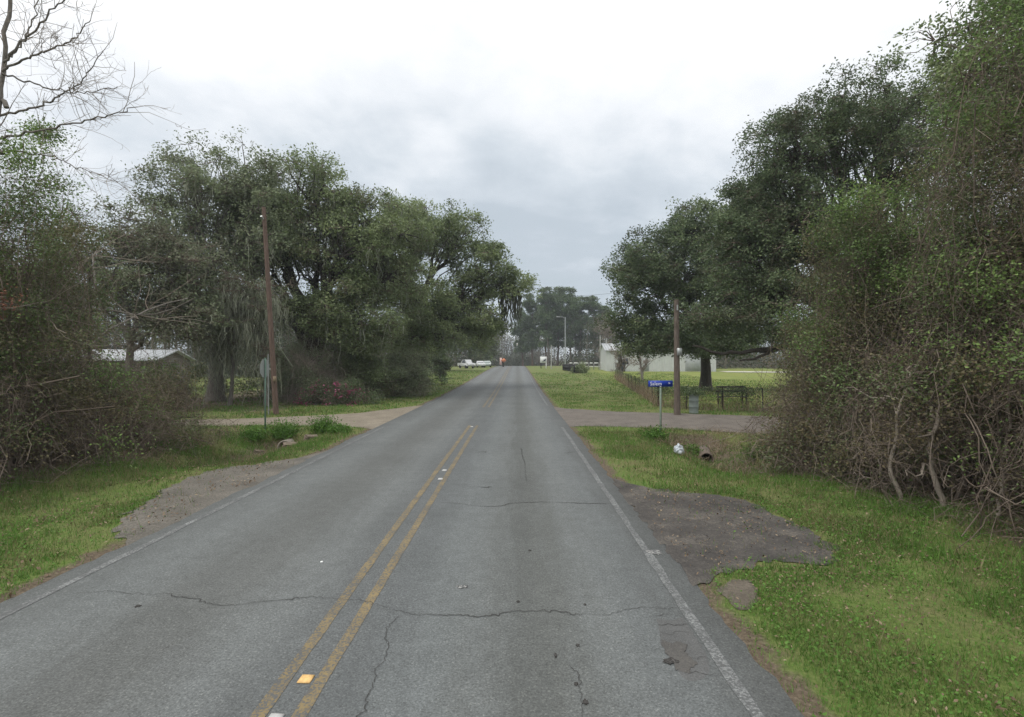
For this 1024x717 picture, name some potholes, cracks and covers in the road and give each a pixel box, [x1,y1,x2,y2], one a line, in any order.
crack [77,590,676,717]
